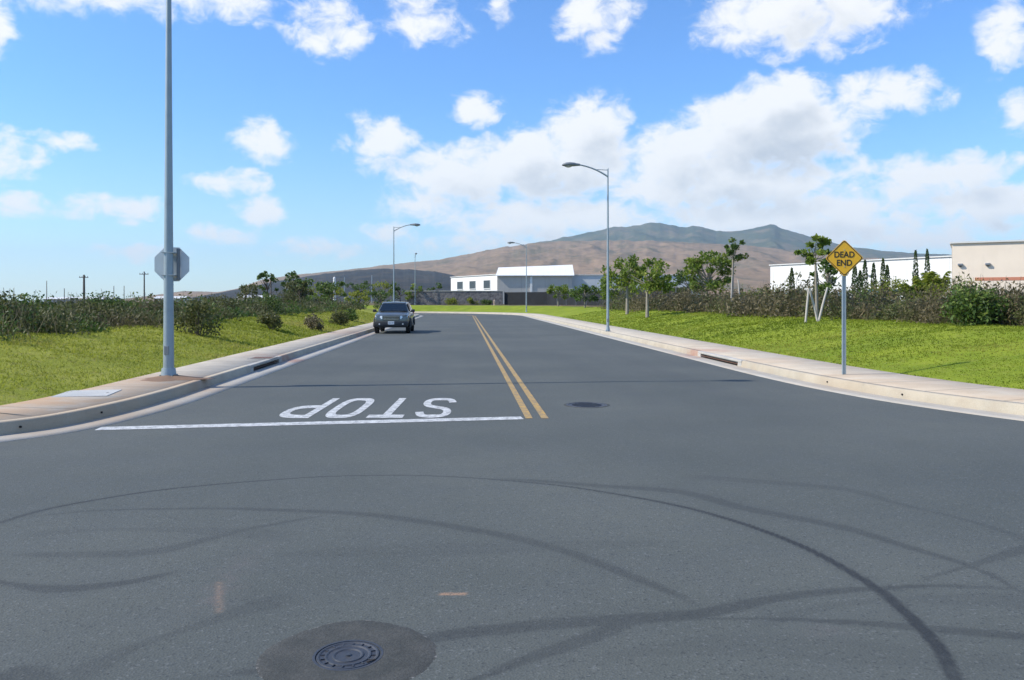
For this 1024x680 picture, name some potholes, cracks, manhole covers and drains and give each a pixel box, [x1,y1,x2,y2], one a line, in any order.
utility cover [52,389,122,397]
drain grate [698,351,743,366]
drain grate [247,356,282,371]
